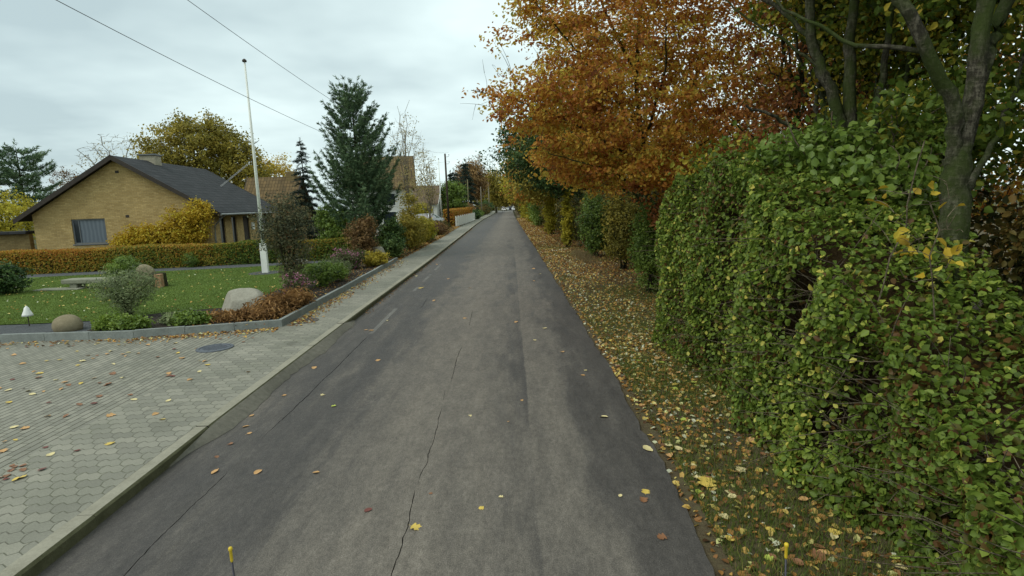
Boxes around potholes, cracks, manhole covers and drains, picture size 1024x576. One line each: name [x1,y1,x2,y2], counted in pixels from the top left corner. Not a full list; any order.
crack [391,349,461,576]
manhole cover [195,343,234,353]
